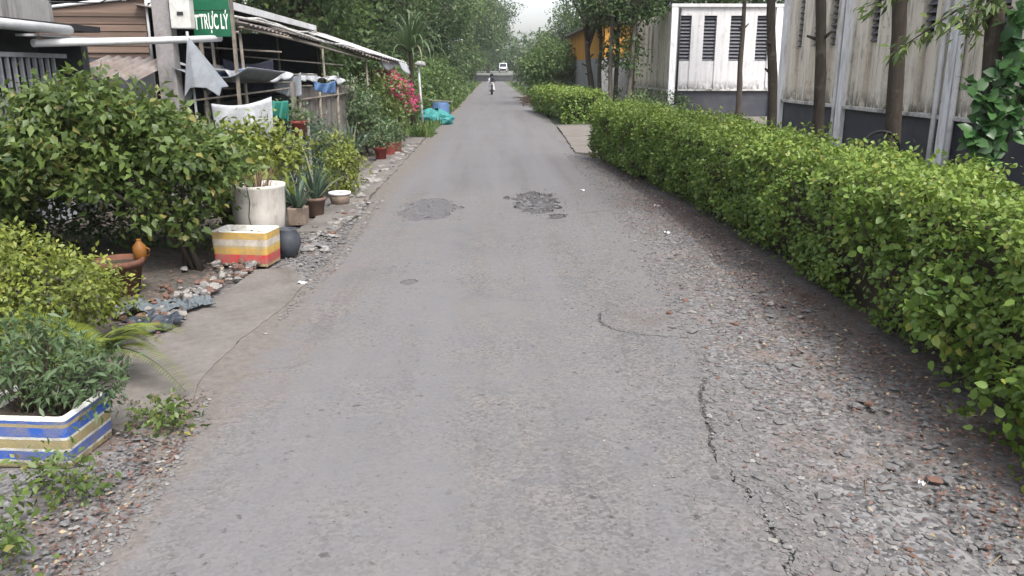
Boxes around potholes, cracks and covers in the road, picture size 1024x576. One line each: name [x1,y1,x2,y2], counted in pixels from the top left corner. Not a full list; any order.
crack [688,373,806,576]
crack [595,306,679,339]
pothole [503,188,567,219]
